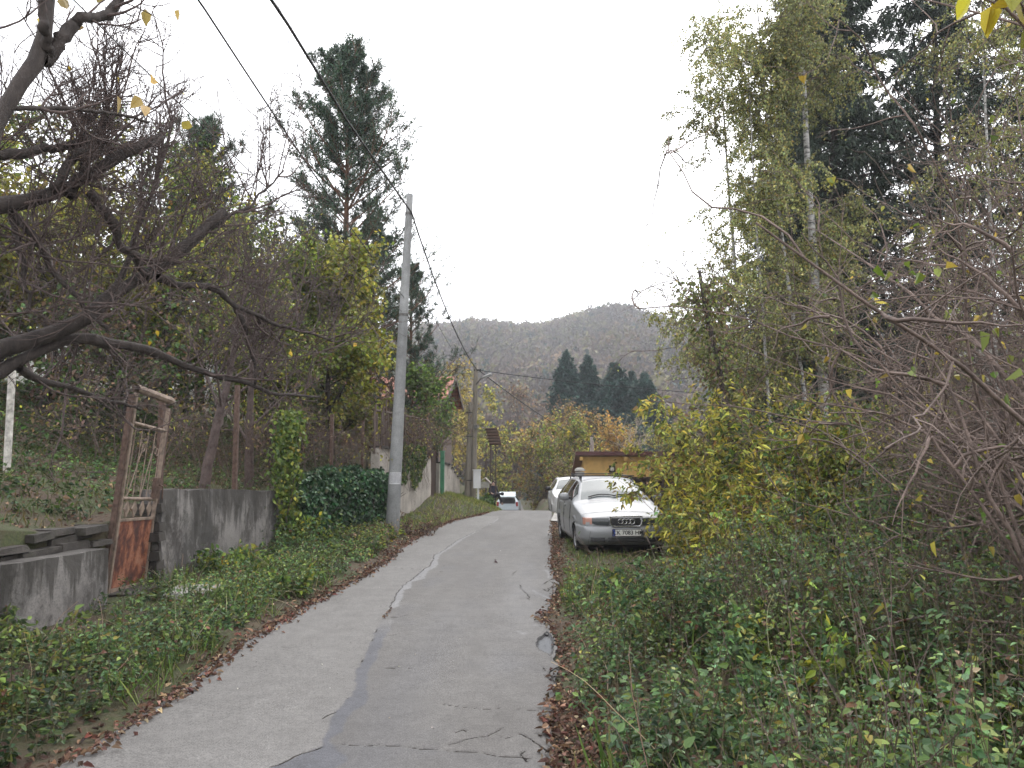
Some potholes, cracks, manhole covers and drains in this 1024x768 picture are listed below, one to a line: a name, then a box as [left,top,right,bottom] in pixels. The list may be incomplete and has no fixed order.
pothole [536,631,555,656]
crack [271,526,486,767]
crack [342,729,565,768]
